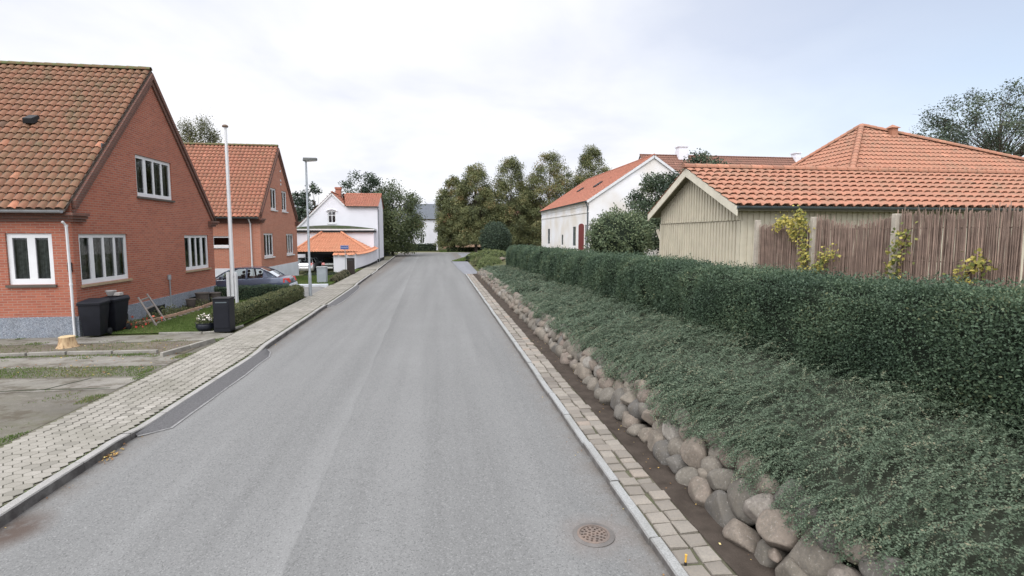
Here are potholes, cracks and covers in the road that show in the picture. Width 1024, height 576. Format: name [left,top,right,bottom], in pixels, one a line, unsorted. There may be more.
manhole cover [572,523,615,548]
